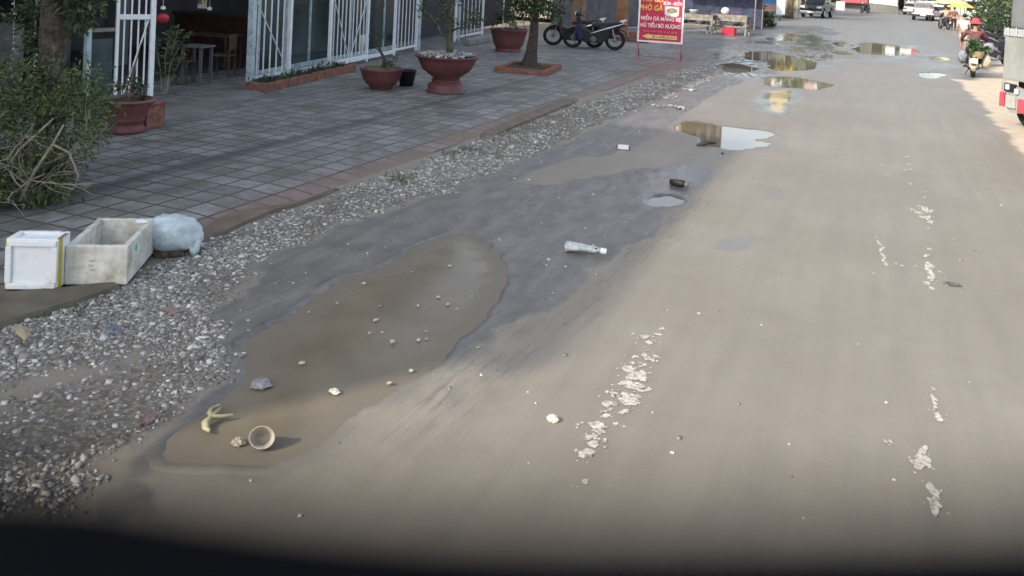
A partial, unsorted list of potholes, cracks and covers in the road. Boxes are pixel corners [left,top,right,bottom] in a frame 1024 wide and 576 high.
pothole [843,42,927,57]
pothole [640,192,692,209]
pothole [668,120,781,152]
pothole [145,231,518,476]
pothole [755,76,841,91]
pothole [734,51,824,72]
